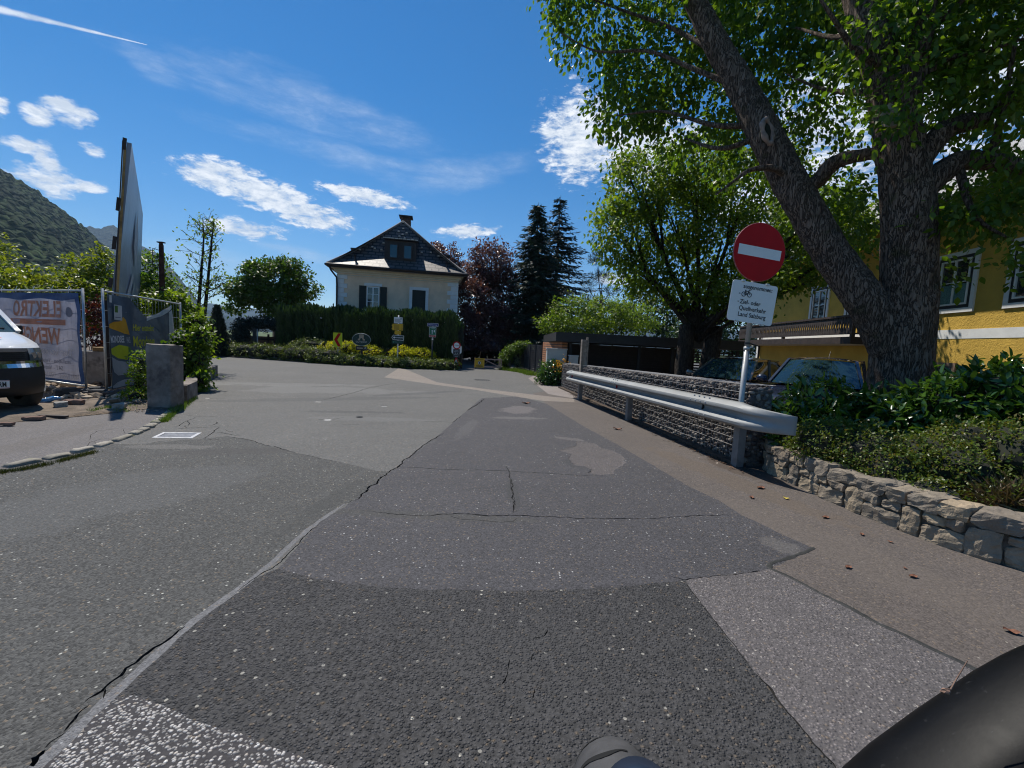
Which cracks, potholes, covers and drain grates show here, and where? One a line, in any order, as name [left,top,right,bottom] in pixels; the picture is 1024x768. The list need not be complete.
crack [502,630,548,699]
crack [357,435,720,522]
crack [45,626,185,748]
